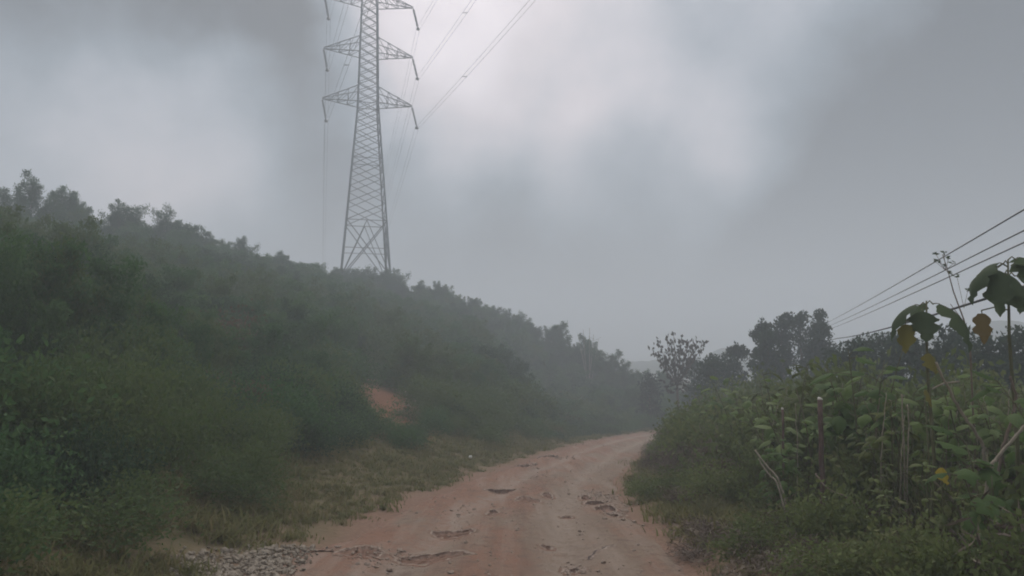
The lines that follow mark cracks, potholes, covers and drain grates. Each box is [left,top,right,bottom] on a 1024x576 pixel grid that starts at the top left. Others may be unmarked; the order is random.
pothole [589,504,620,512]
pothole [389,549,478,567]
pothole [330,544,390,559]
pothole [427,528,480,540]
pothole [538,492,556,500]
